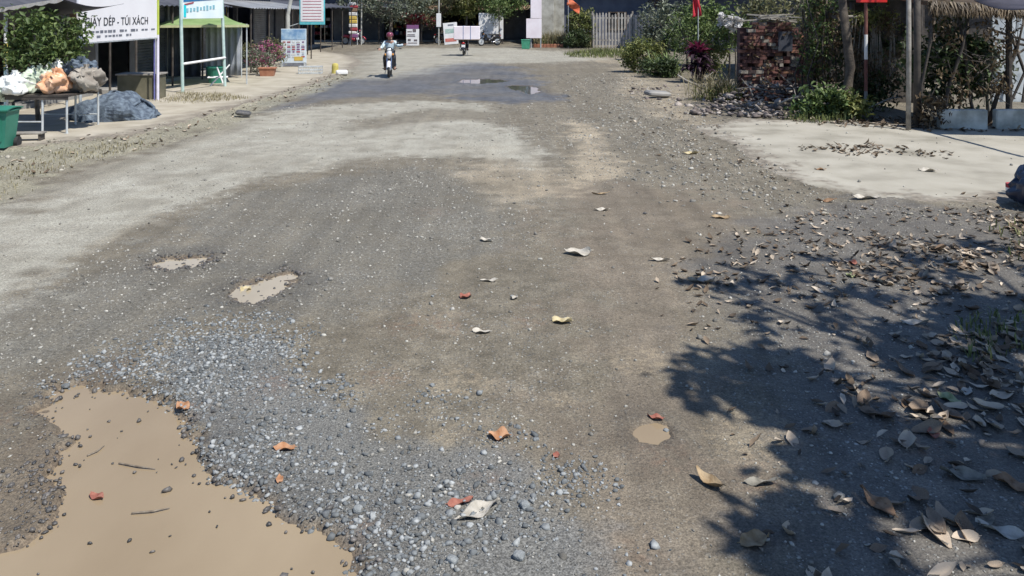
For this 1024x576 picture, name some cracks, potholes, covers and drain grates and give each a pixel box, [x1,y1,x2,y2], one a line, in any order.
pothole [0,377,376,575]
pothole [147,253,217,271]
pothole [225,267,301,306]
pothole [629,418,676,447]
